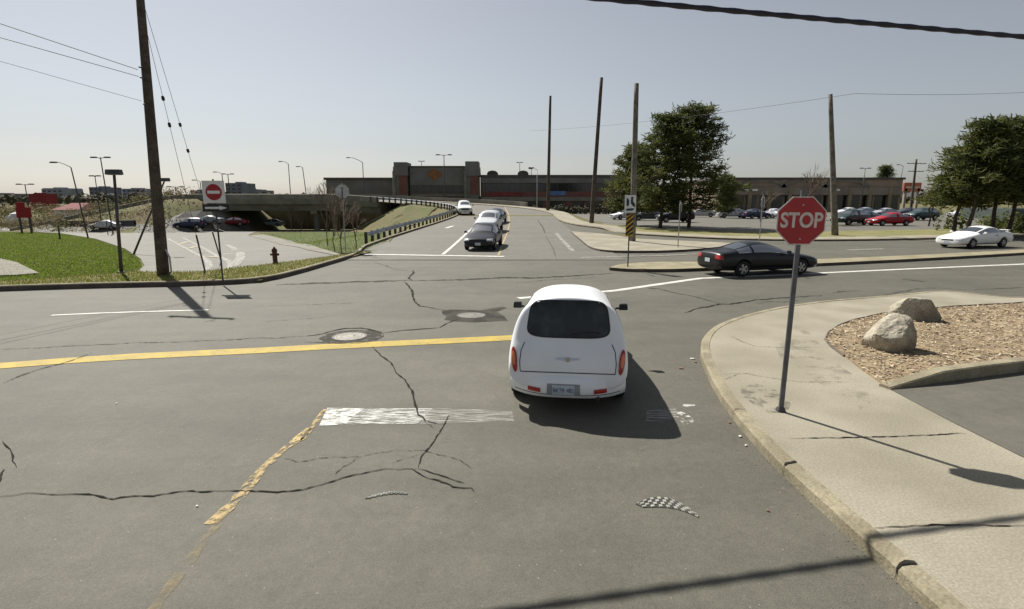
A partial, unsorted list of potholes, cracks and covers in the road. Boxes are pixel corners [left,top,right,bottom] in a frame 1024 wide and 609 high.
crack [651,275,856,312]
manhole cover [332,332,367,341]
crack [0,442,17,481]
crack [4,264,474,499]
